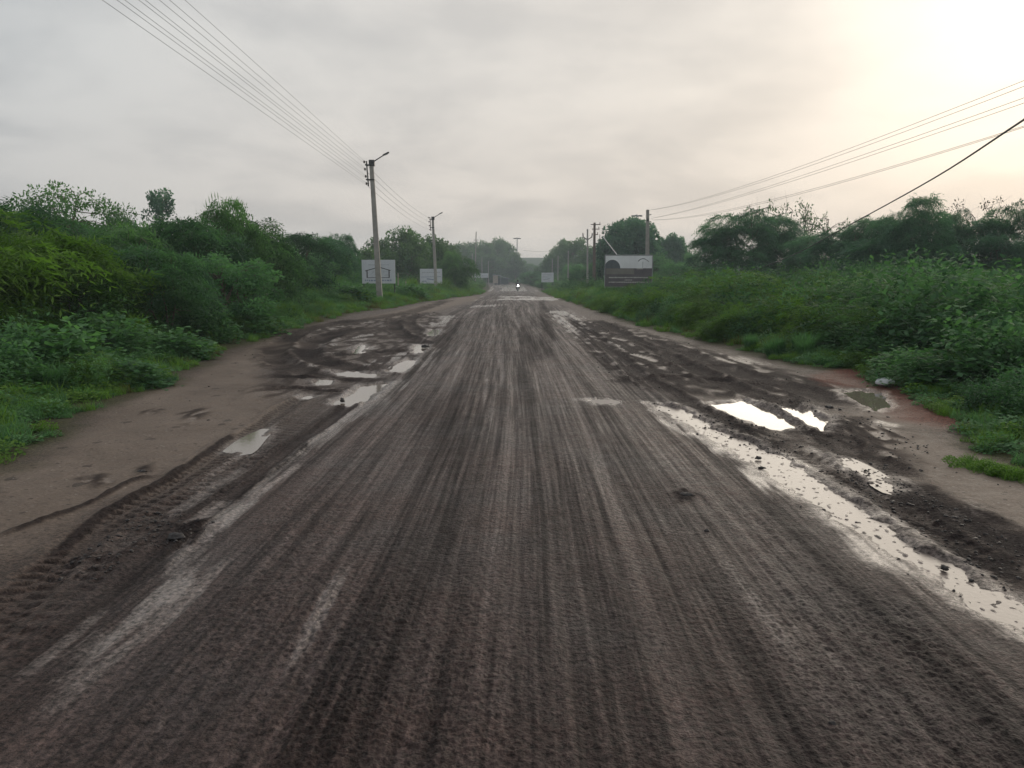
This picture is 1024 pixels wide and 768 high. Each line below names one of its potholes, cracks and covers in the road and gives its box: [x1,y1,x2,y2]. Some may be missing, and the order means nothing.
pothole [699,397,803,432]
pothole [772,402,842,432]
pothole [325,381,395,408]
pothole [832,388,900,412]
pothole [380,356,423,374]
